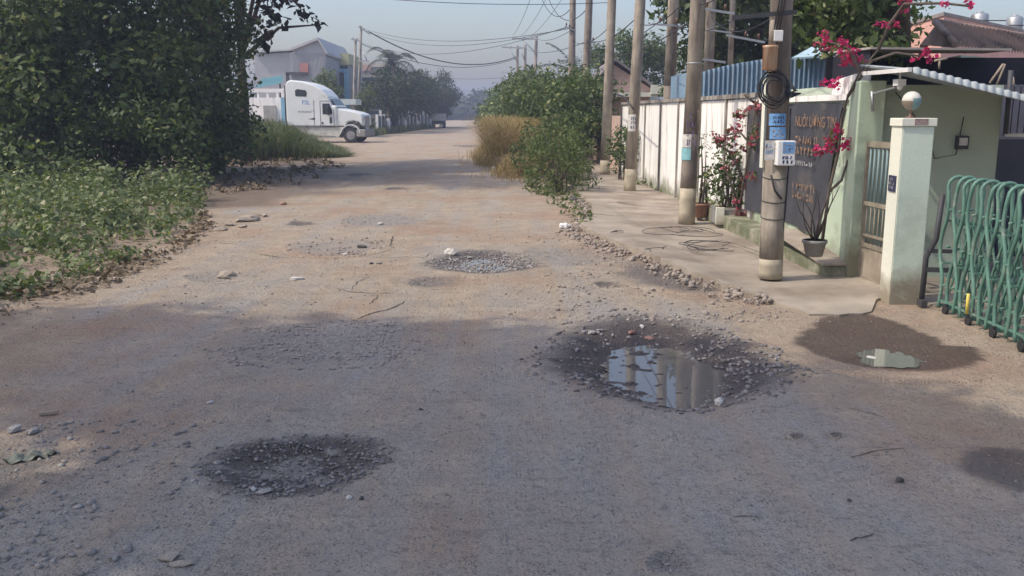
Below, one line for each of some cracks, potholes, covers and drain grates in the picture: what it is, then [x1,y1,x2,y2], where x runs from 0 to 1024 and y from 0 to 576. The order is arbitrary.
pothole [502,305,833,420]
pothole [172,429,415,510]
pothole [405,247,561,277]
crack [338,277,404,319]
